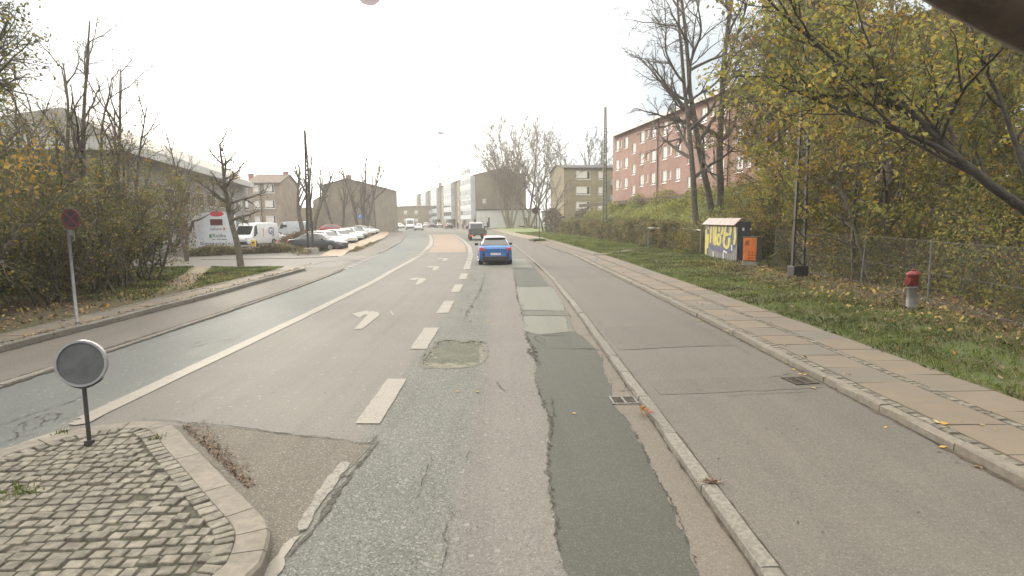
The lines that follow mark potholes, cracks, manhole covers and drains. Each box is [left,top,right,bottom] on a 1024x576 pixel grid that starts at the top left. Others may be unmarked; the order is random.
crack [0,396,81,441]
drain grate [781,376,820,385]
drain grate [607,396,640,405]
crack [441,504,454,573]
